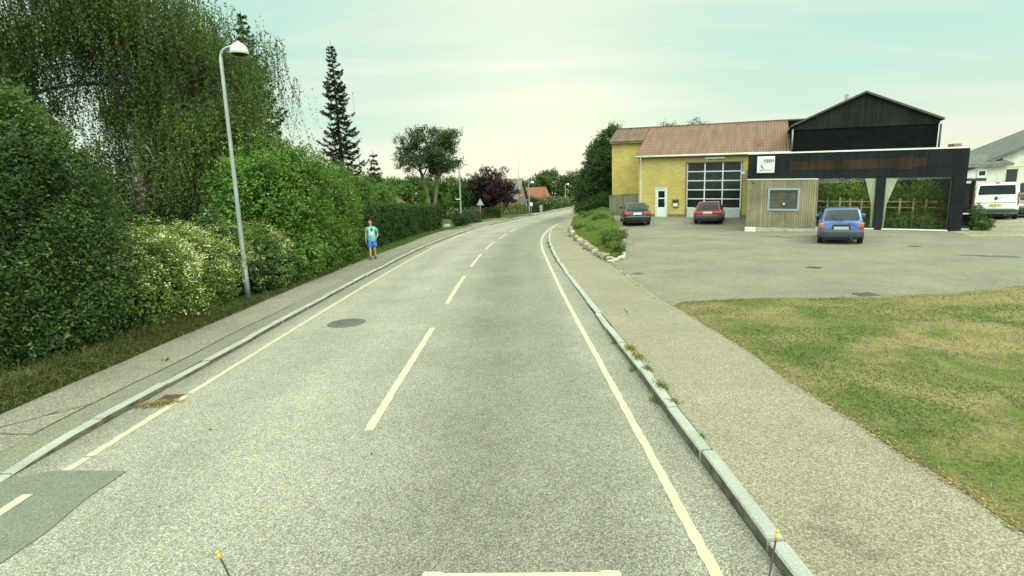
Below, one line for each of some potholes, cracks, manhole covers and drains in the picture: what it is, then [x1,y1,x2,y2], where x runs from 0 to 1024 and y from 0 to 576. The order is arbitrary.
drain grate [150,394,185,405]
manhole cover [327,318,366,328]
